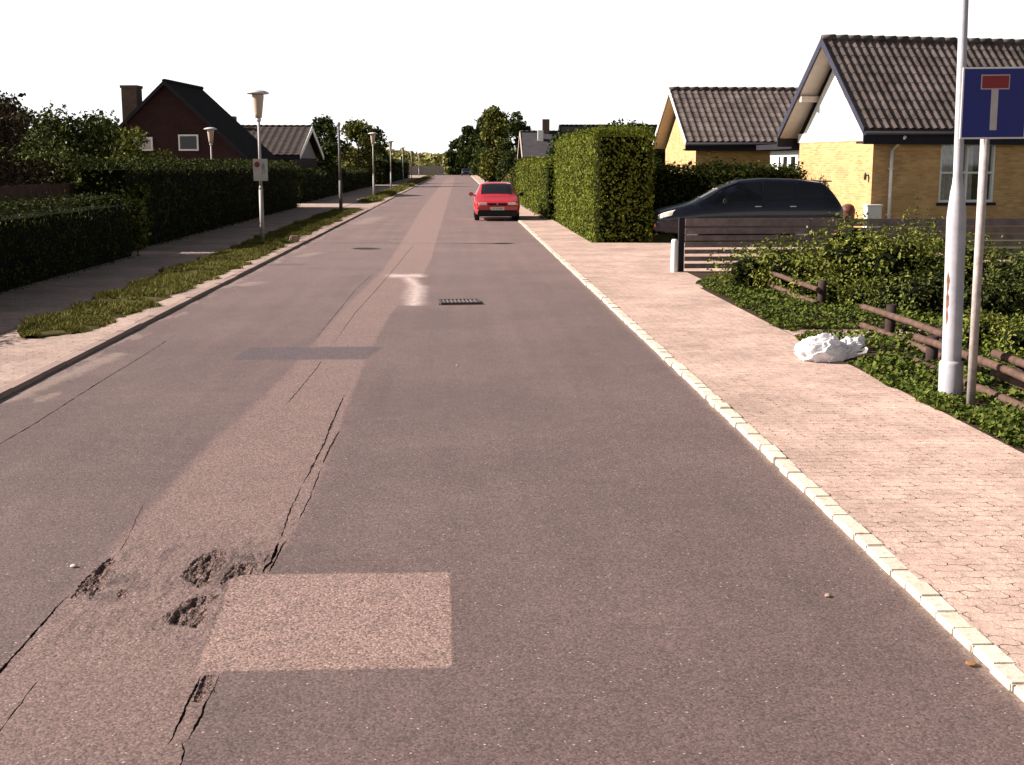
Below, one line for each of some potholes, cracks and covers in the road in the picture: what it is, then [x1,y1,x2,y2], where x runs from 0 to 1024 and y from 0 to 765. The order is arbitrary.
crack [0,337,172,444]
crack [0,505,143,731]
pothole [182,550,228,588]
crack [167,675,219,765]
pothole [71,556,116,598]
pothole [219,563,259,588]
crack [263,246,413,572]
pothole [162,594,222,628]
